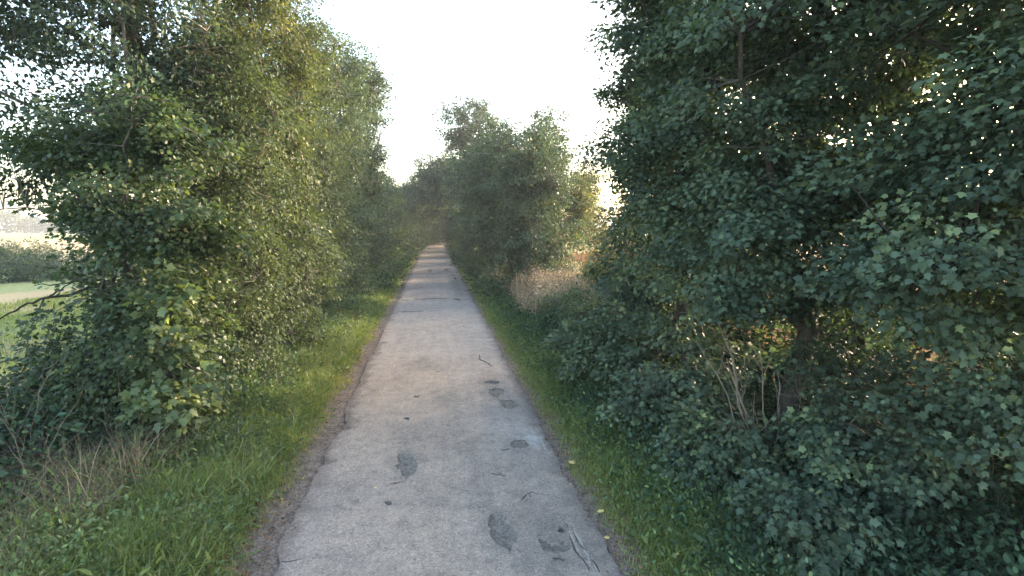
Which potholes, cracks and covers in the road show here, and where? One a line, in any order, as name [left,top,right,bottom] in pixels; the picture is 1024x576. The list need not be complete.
pothole [538,539,571,553]
pothole [510,439,529,448]
pothole [487,513,517,553]
pothole [488,388,504,398]
pothole [499,400,518,409]
pothole [396,453,418,479]
crack [563,521,600,573]
